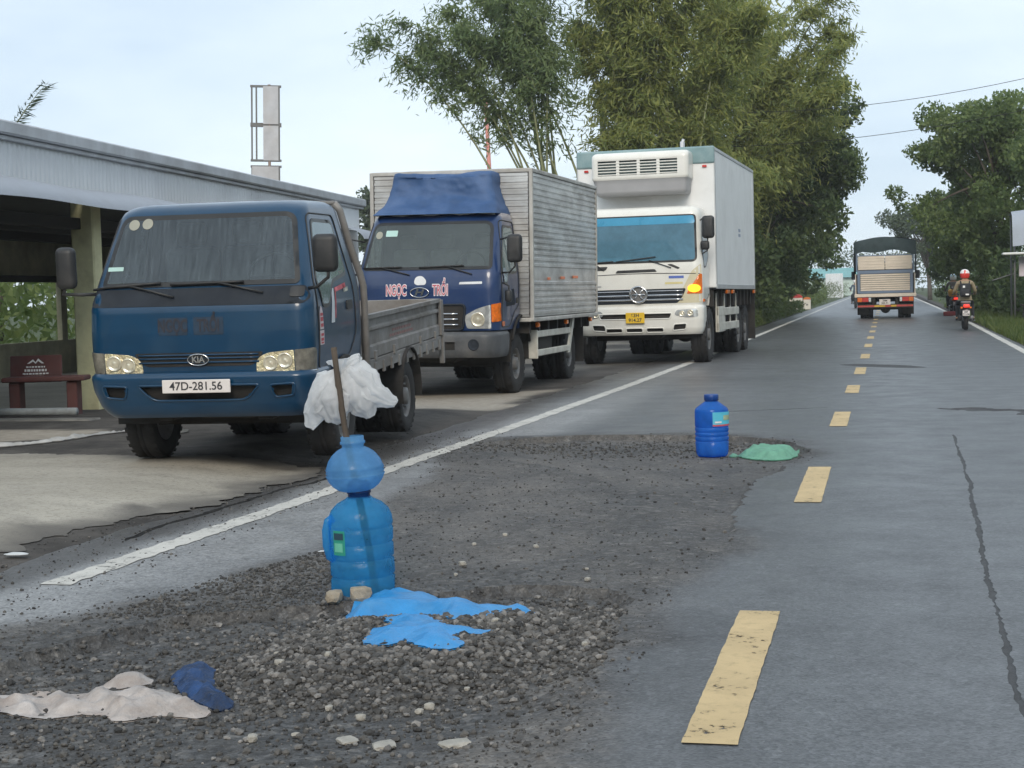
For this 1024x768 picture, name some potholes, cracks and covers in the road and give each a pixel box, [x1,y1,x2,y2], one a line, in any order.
crack [952,434,1024,717]
pothole [472,435,811,552]
pothole [0,585,636,768]
